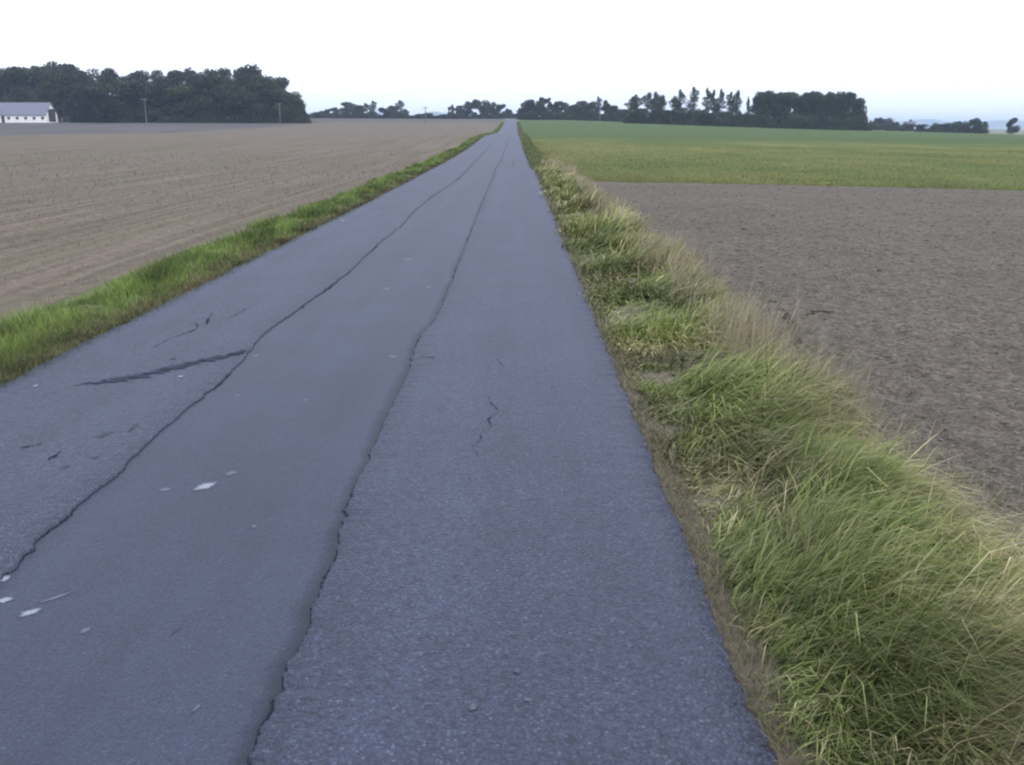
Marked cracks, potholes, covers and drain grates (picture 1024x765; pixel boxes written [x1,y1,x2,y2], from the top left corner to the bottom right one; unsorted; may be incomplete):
crack [247,135,510,765]
crack [0,149,487,580]
